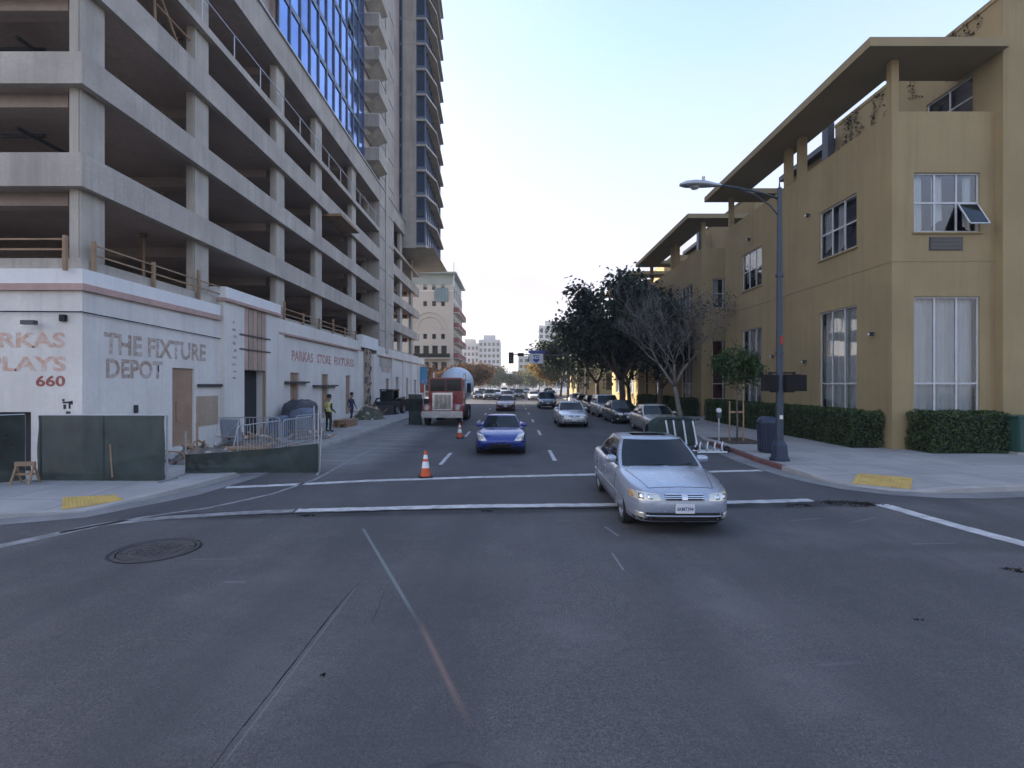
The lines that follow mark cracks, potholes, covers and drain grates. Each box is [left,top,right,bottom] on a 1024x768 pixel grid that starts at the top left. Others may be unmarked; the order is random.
manhole cover [105,537,205,564]
pothole [814,500,884,508]
